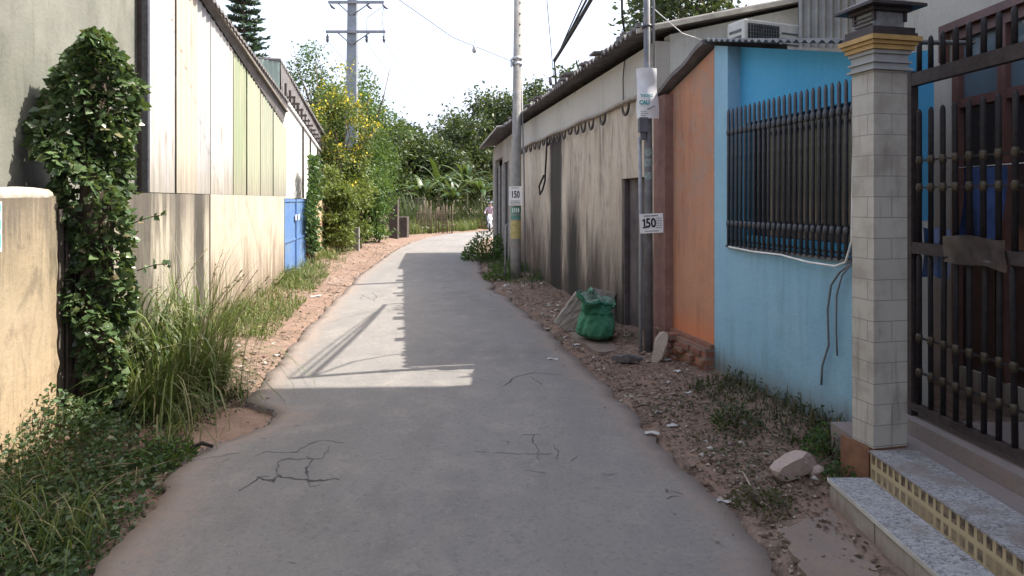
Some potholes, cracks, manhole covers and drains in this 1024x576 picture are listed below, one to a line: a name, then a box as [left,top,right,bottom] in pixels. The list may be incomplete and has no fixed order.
crack [239,438,339,491]
crack [474,433,577,473]
